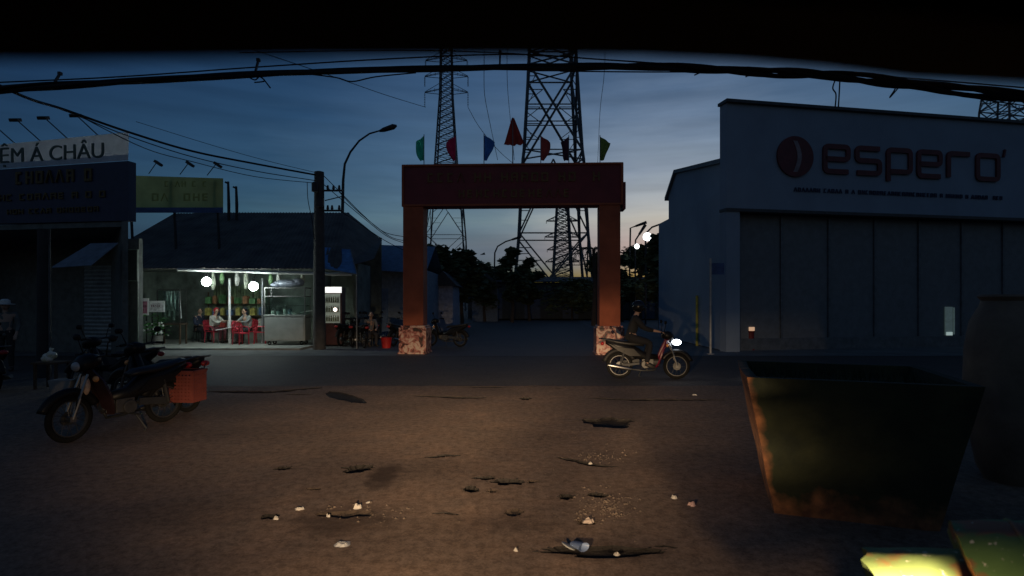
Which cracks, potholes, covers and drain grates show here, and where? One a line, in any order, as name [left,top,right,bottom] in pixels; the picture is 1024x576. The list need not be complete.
pothole [326,391,367,404]
pothole [490,478,525,486]
pothole [315,510,375,519]
pothole [504,509,524,517]
pothole [533,545,668,559]
pothole [579,417,635,429]
pothole [341,464,374,474]
